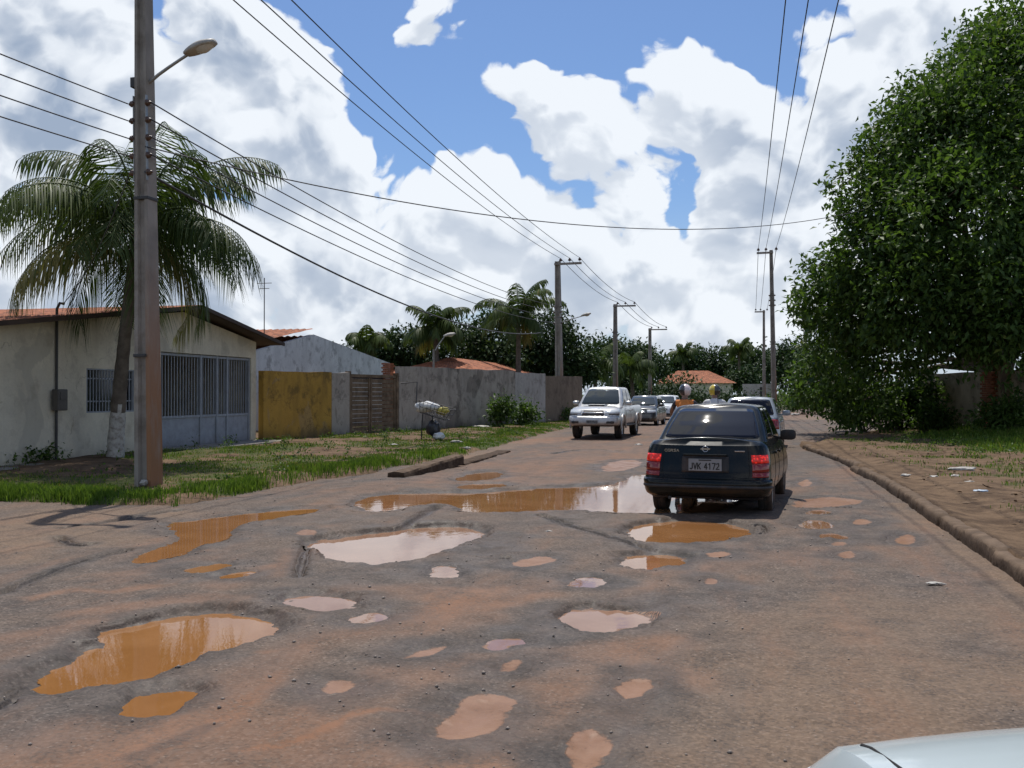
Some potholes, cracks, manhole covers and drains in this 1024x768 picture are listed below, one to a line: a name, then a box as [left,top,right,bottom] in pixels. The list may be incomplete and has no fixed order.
pothole [424,685,530,741]
pothole [111,677,214,718]
pothole [346,472,745,514]
pothole [126,505,334,564]
pothole [262,587,370,612]
pothole [775,495,880,509]
pothole [292,521,494,565]
pothole [550,599,661,634]
pothole [599,673,664,704]
pothole [0,600,299,702]
pothole [614,516,769,543]
pothole [603,548,705,571]
